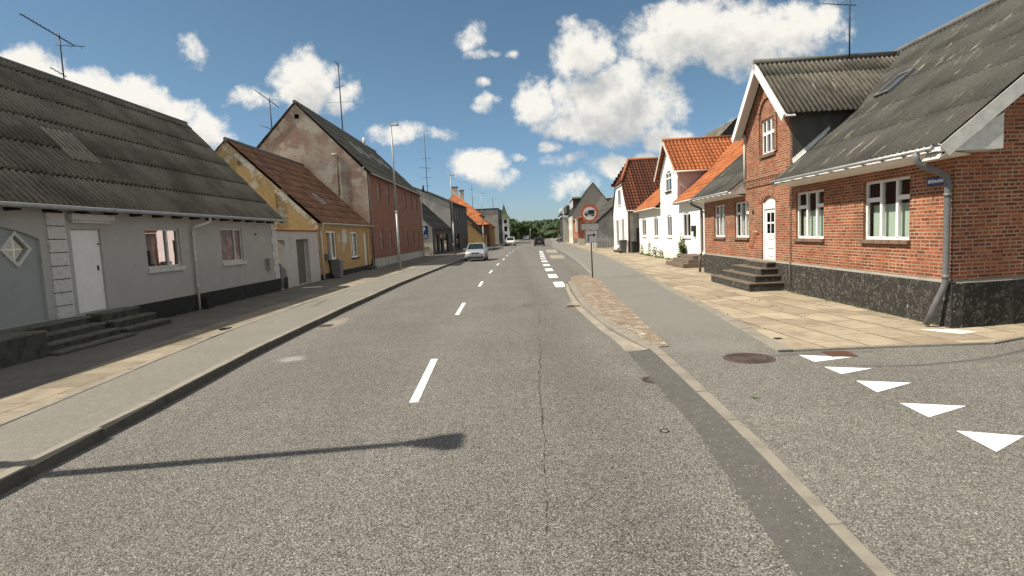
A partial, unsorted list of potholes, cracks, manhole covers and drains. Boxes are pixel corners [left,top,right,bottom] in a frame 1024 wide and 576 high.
manhole cover [723,353,776,364]
crack [524,303,549,531]
